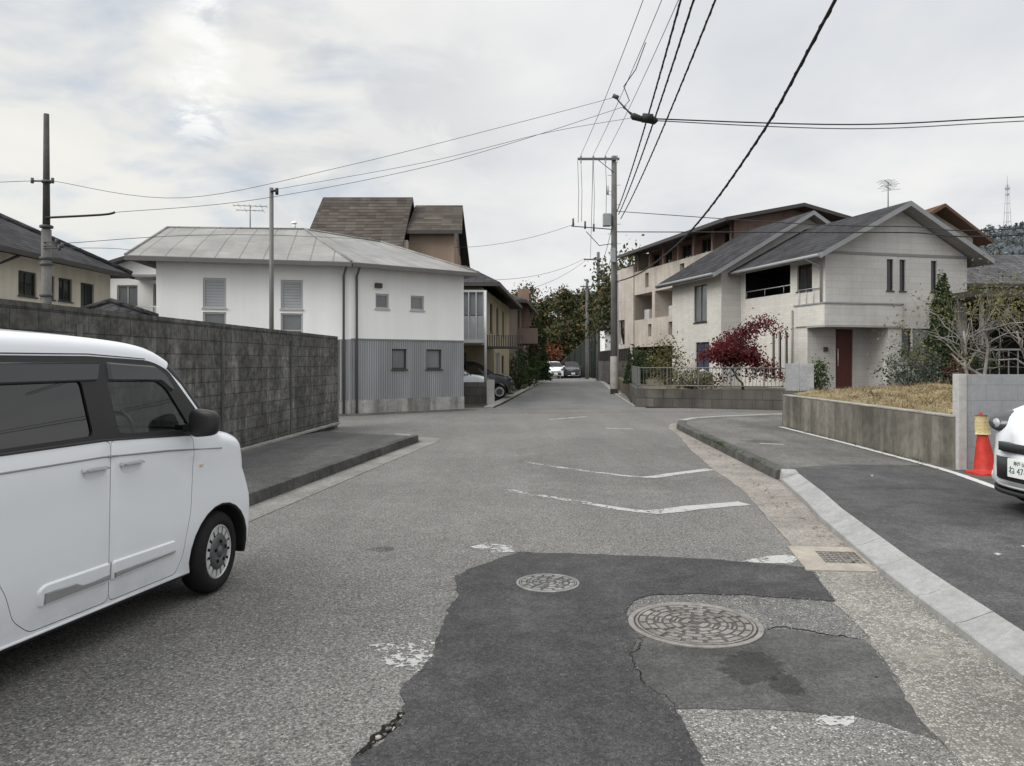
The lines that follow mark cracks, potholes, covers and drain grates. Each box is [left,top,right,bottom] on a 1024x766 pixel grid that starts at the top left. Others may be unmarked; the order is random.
manhole cover [516,573,580,592]
drain grate [788,546,879,572]
manhole cover [628,602,764,649]
